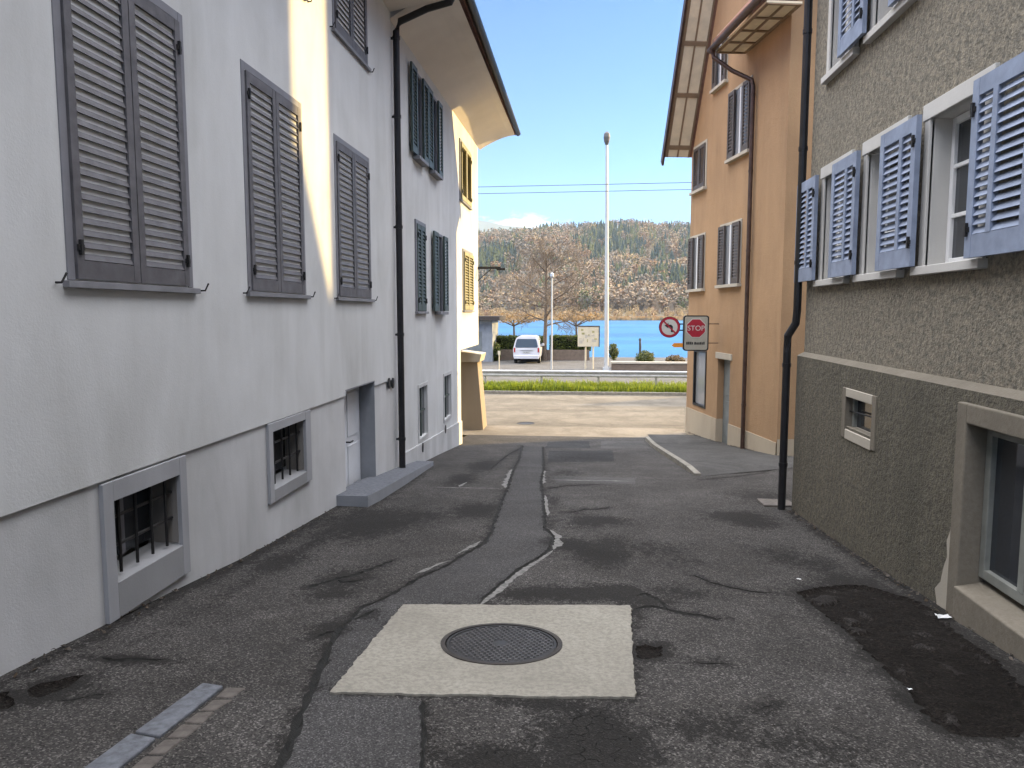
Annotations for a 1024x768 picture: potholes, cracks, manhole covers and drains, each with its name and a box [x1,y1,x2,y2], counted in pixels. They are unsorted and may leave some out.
pothole [635,644,663,659]
pothole [27,675,83,697]
manhole cover [440,623,563,665]
crack [275,445,635,768]
pothole [0,691,15,709]
crack [635,575,769,620]
